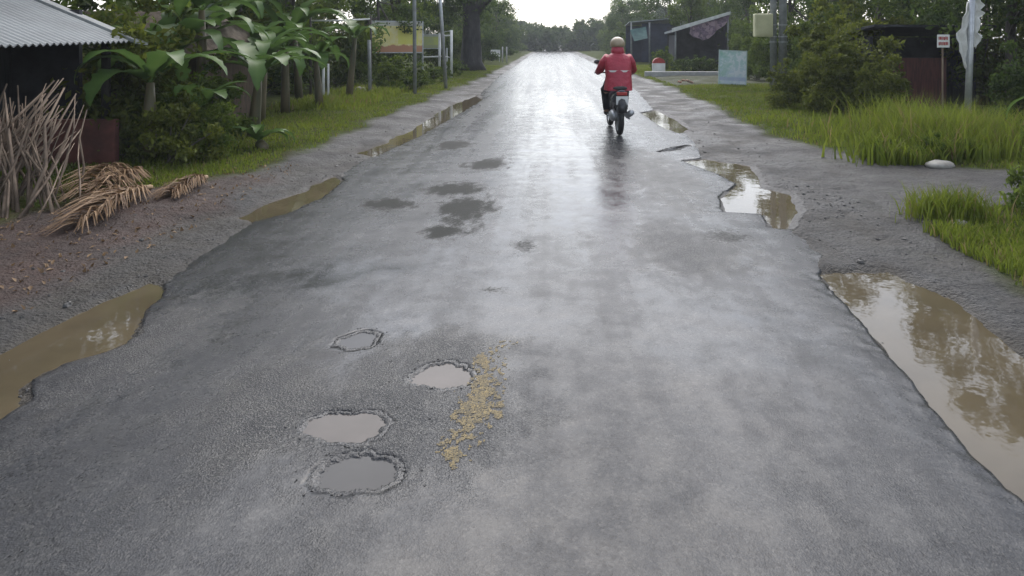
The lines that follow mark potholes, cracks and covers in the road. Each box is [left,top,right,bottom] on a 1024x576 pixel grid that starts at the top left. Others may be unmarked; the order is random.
pothole [295,410,395,448]
pothole [682,156,809,230]
pothole [333,330,381,351]
pothole [306,448,405,496]
pothole [403,360,477,391]
